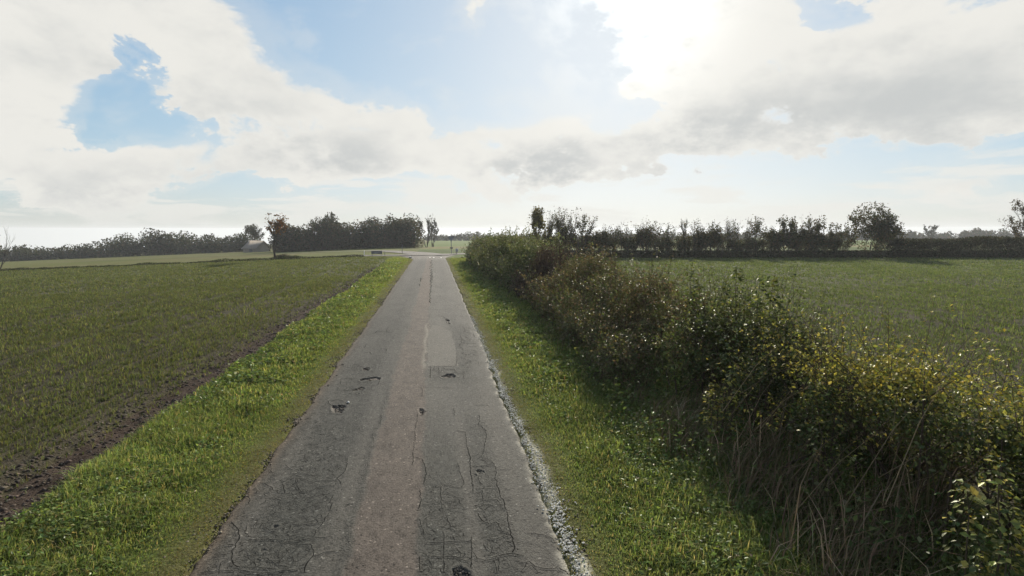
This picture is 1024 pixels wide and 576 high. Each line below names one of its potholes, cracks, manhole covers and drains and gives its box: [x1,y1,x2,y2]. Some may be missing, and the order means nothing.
pothole [446,561,476,576]
pothole [328,404,349,414]
crack [410,404,570,576]
crack [198,327,390,576]
